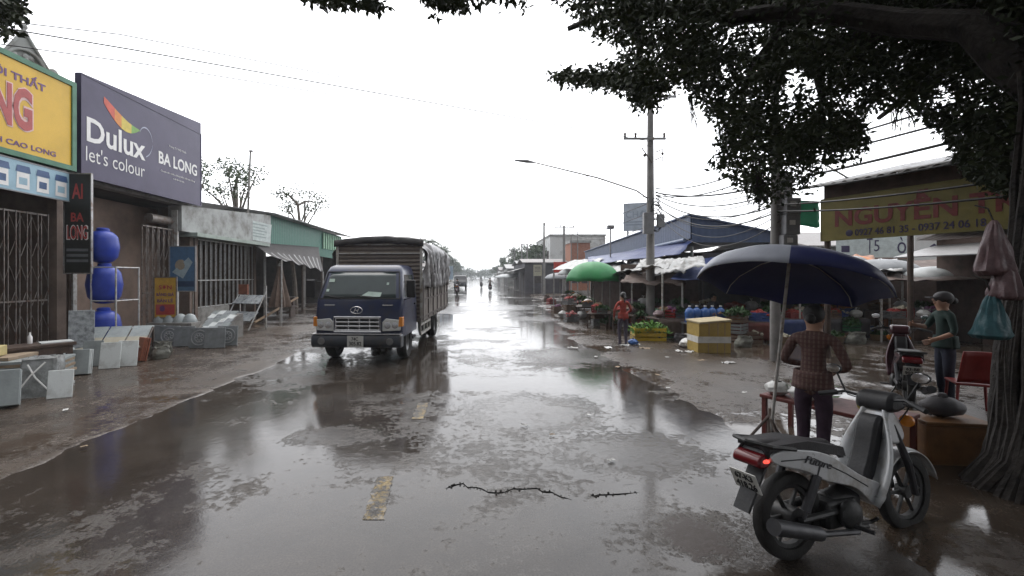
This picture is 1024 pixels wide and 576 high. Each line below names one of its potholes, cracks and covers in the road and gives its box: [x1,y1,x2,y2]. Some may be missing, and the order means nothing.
crack [445,482,640,500]
